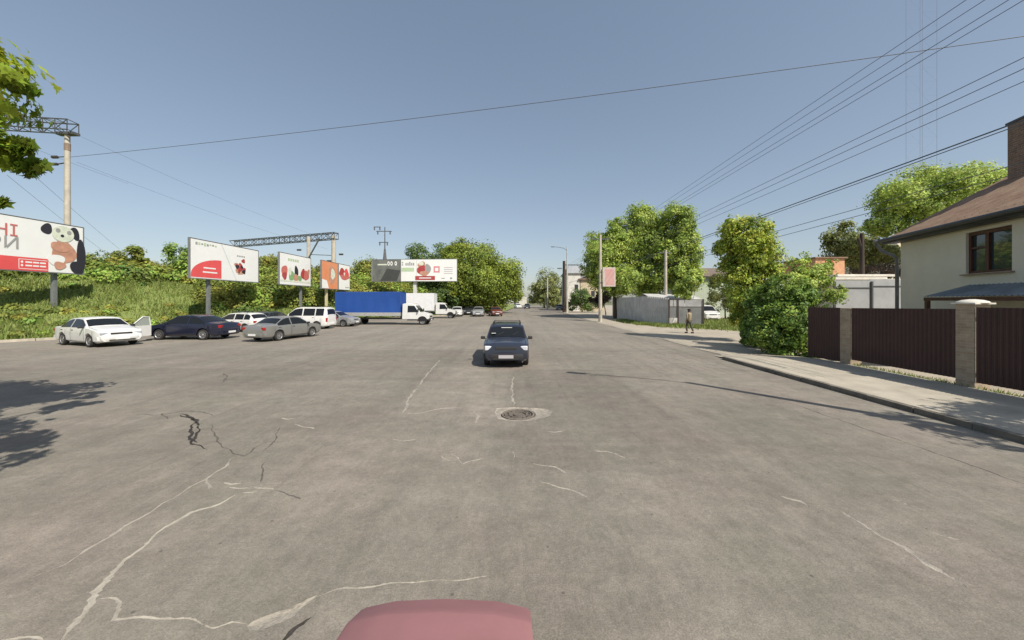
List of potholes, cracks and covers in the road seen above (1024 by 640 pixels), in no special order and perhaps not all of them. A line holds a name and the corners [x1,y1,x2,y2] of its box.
manhole cover [495,407,553,421]
crack [513,452,589,498]
crack [782,496,995,587]
crack [317,576,485,597]
crack [474,377,516,423]
crack [1,411,314,640]
